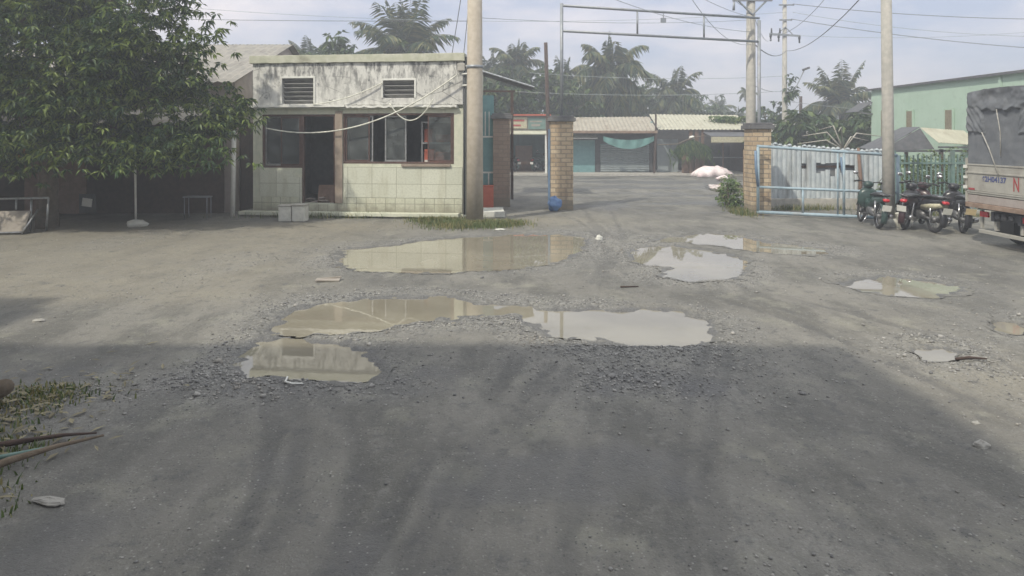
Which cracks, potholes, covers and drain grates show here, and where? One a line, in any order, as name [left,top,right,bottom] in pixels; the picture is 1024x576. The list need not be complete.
pothole [624,244,757,283]
pothole [256,290,541,338]
pothole [822,272,975,299]
pothole [983,313,1024,336]
pothole [894,342,974,363]
pothole [513,303,732,350]
pothole [648,231,834,257]
pothole [222,333,399,386]
pothole [330,231,595,275]
